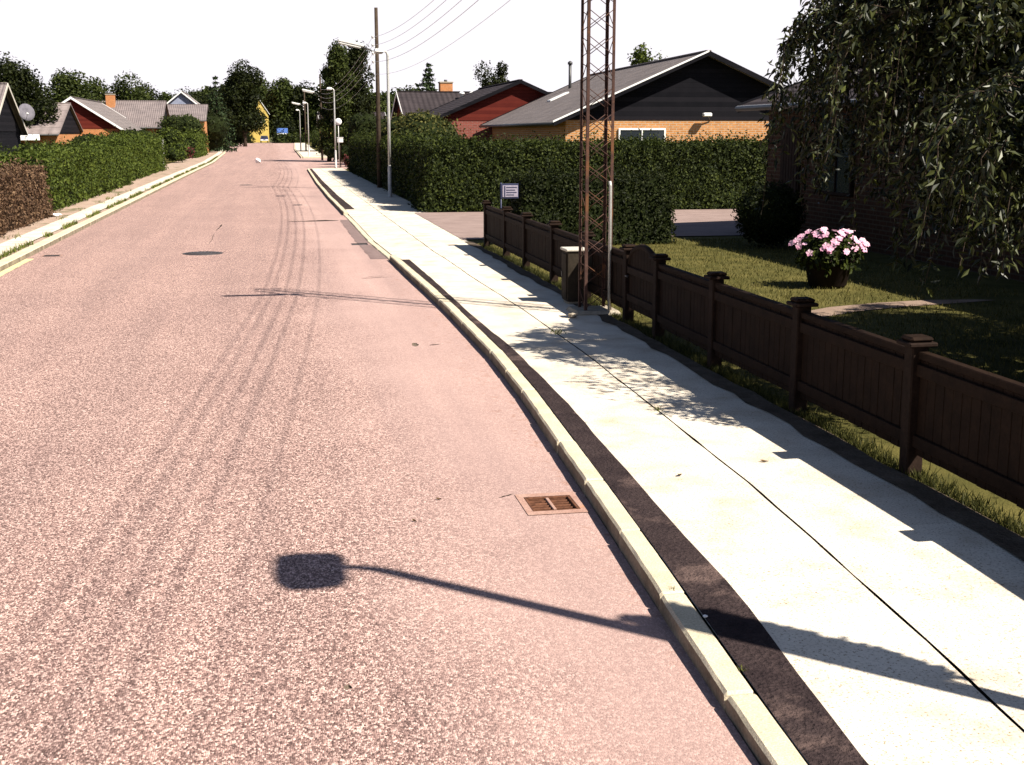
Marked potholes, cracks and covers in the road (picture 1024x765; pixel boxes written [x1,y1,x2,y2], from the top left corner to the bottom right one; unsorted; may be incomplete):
drain grate [515,492,589,515]
